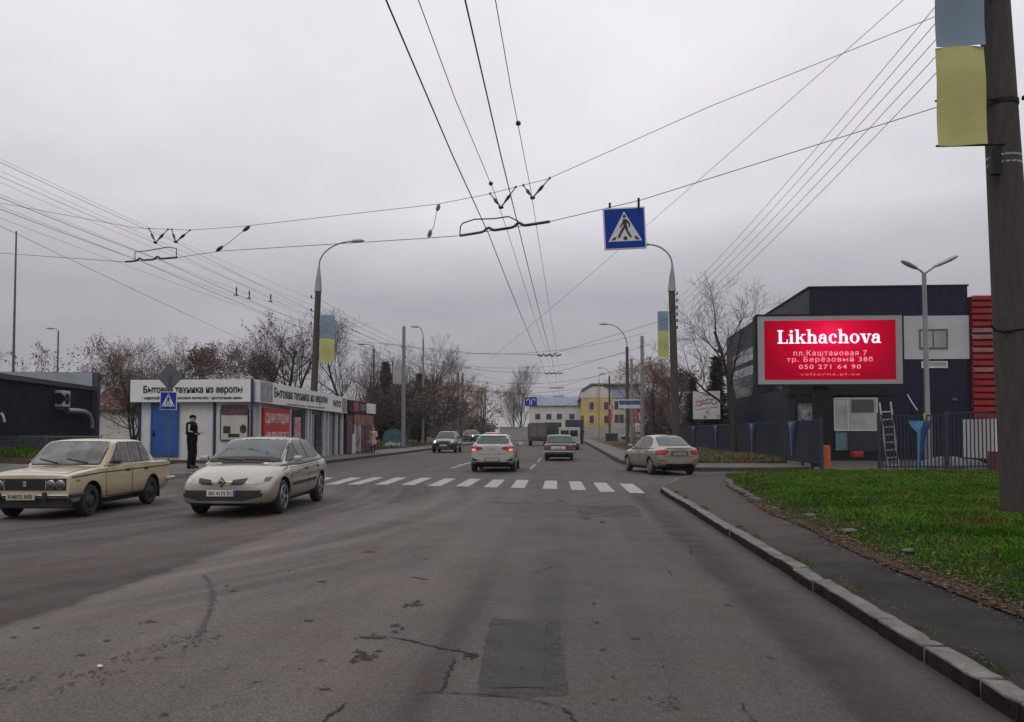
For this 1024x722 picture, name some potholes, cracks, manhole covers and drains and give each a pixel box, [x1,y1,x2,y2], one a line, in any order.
crack [322,703,345,722]
pothole [349,649,382,664]
crack [391,636,578,722]
